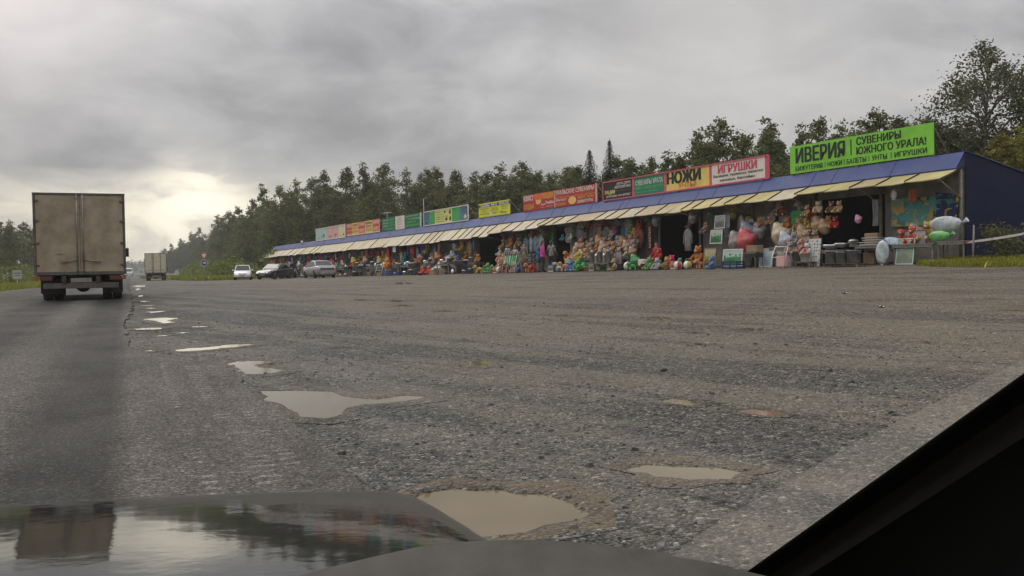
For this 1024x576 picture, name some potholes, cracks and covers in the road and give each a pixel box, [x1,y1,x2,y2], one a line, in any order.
pothole [600,454,784,489]
pothole [222,357,304,377]
pothole [386,472,632,541]
pothole [247,384,455,424]
